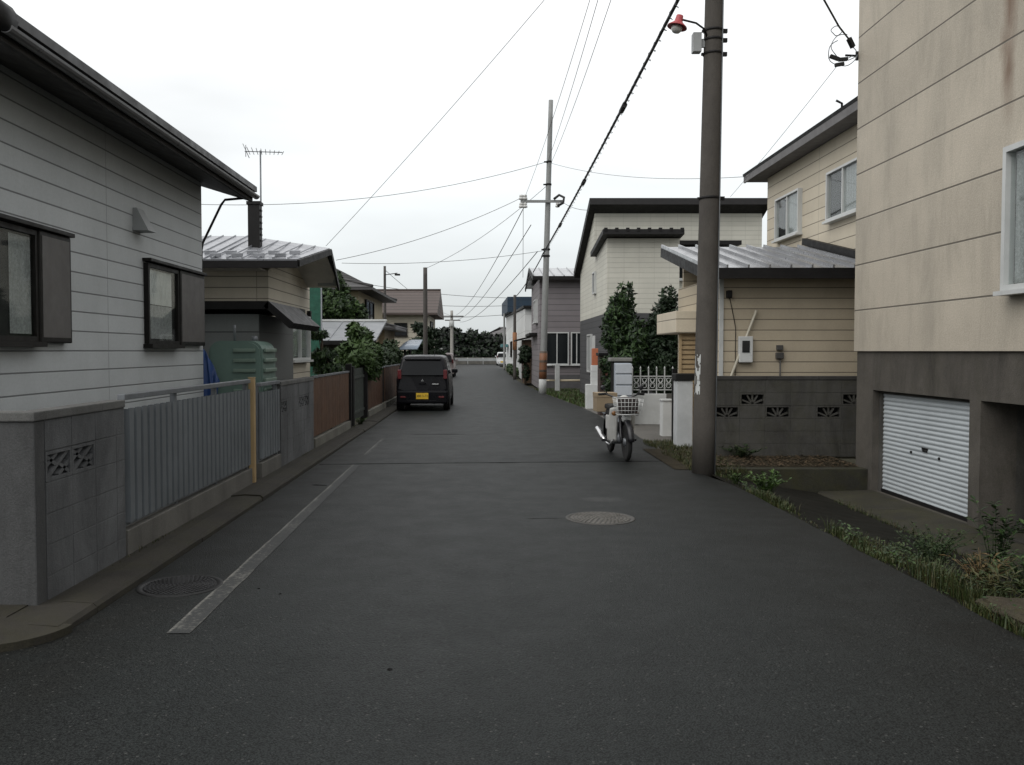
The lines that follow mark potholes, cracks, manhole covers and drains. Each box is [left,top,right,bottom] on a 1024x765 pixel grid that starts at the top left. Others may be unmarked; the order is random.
manhole cover [136,575,223,597]
manhole cover [566,511,635,525]
